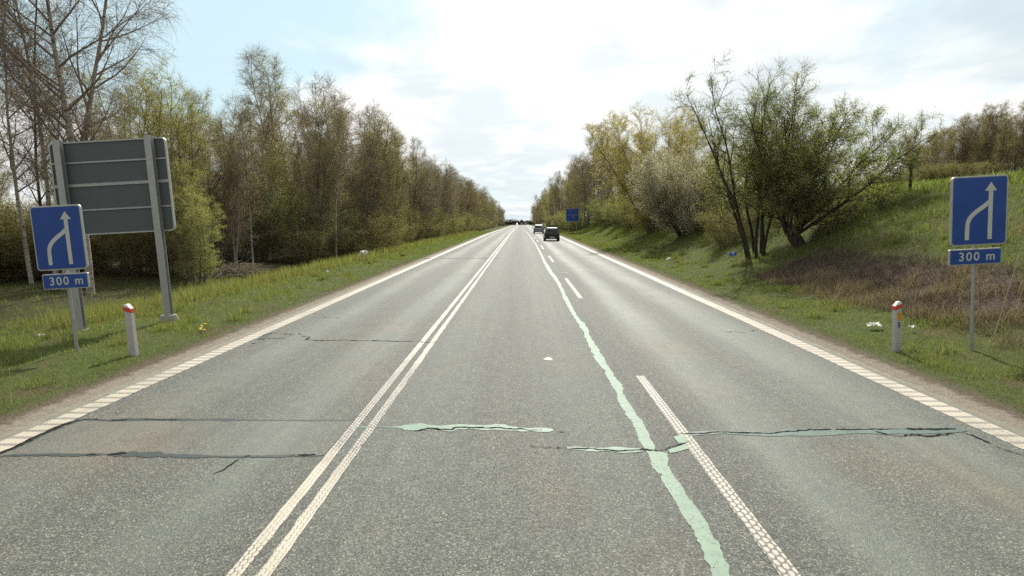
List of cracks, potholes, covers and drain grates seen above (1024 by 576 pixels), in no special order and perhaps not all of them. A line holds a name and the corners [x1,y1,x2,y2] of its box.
crack [257,333,439,343]
